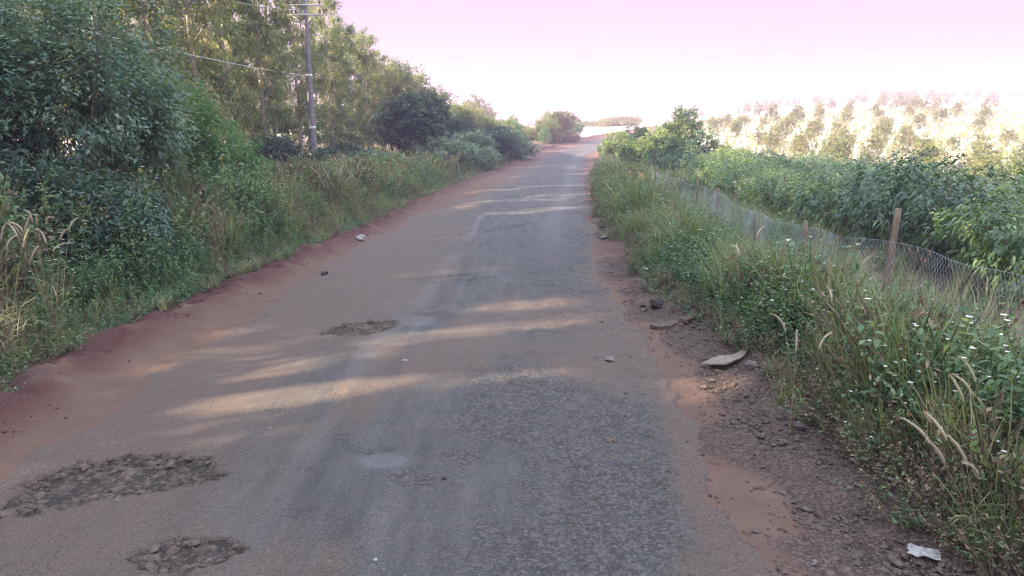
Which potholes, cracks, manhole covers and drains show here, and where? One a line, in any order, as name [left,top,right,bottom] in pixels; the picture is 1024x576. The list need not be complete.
pothole [316,319,401,336]
pothole [0,451,240,523]
pothole [126,535,247,576]
